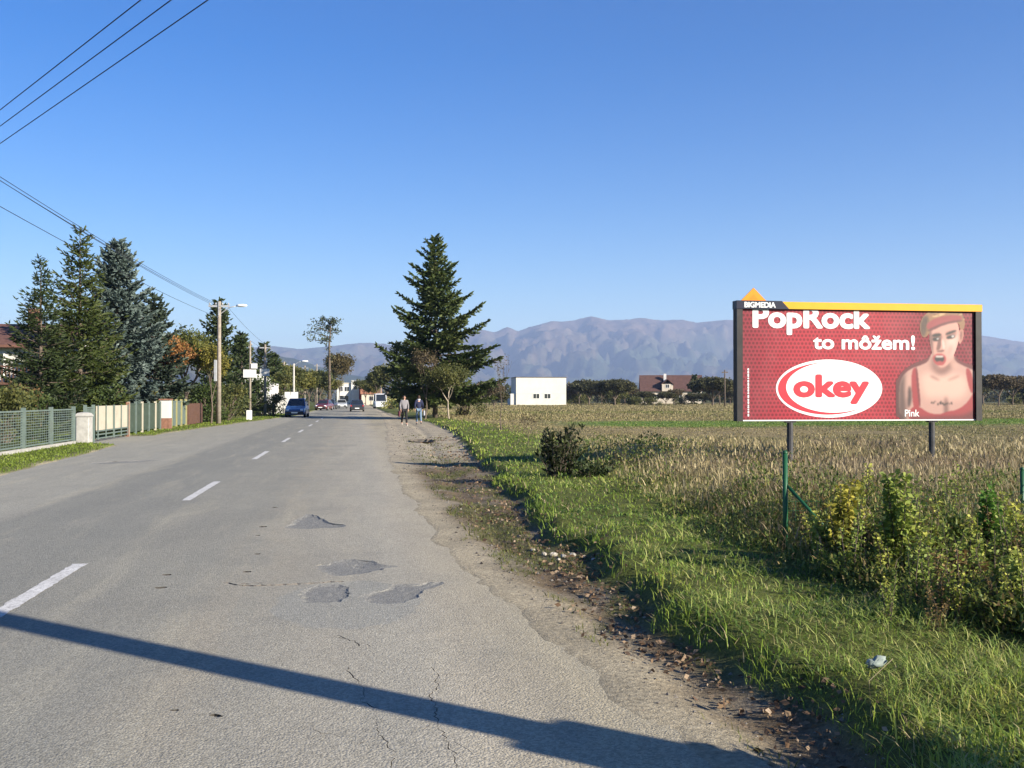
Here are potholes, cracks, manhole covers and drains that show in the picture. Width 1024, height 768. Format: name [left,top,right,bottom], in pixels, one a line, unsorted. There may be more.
pothole [299,584,351,603]
crack [423,667,472,768]
pothole [316,559,397,576]
crack [346,667,396,768]
pothole [359,582,444,604]
pothole [285,514,346,529]
